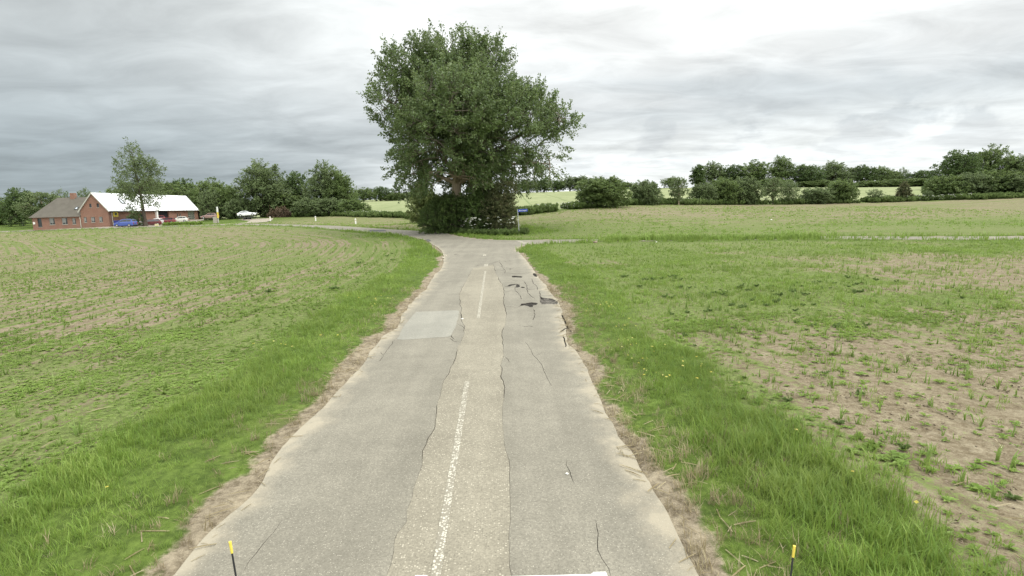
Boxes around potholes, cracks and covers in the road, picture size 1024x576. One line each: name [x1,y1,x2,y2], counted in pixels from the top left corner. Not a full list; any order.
crack [387,275,469,574]
crack [473,261,550,576]
